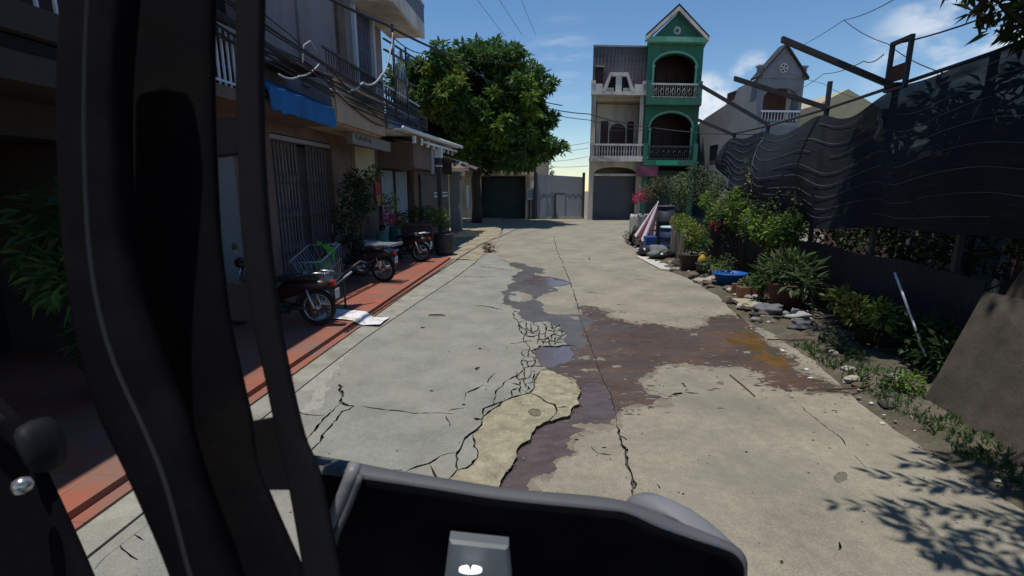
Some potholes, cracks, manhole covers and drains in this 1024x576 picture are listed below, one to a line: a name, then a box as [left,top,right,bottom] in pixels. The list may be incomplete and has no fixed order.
crack [94,525,147,570]
crack [301,305,637,495]
